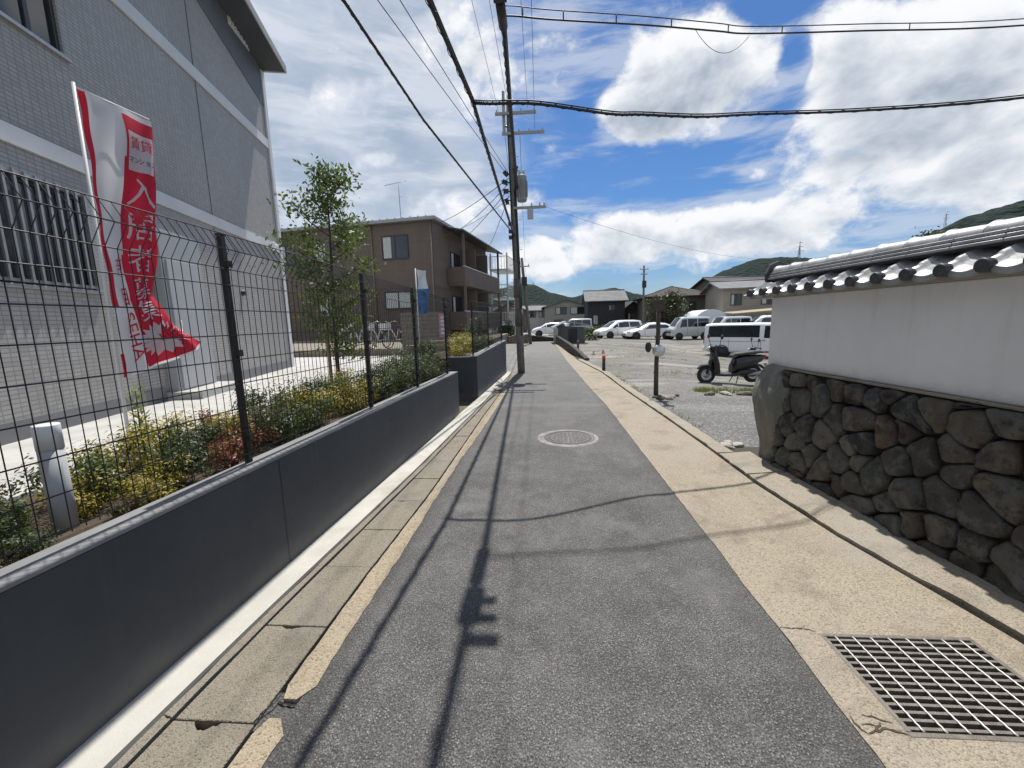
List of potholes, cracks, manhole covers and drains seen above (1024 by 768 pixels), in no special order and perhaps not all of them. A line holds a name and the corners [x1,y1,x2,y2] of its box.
crack [850,714,909,735]
drain grate [819,633,1024,743]
manhole cover [538,430,599,447]
